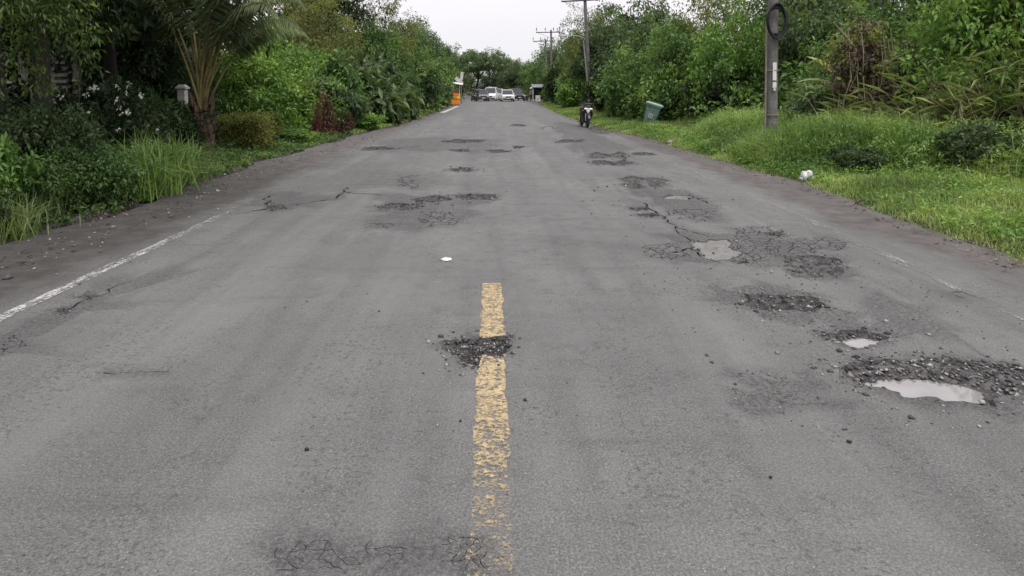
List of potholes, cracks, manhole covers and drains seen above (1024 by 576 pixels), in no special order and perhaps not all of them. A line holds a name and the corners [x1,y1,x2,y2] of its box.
crack [731,226,849,261]
pothole [814,346,1024,423]
crack [254,175,422,211]
pothole [439,191,507,202]
crack [274,540,409,570]
pothole [606,174,672,192]
pothole [803,325,911,349]
pothole [367,202,440,212]
crack [441,537,487,576]
pothole [644,176,689,188]
pothole [587,158,643,166]
crack [642,196,720,263]
